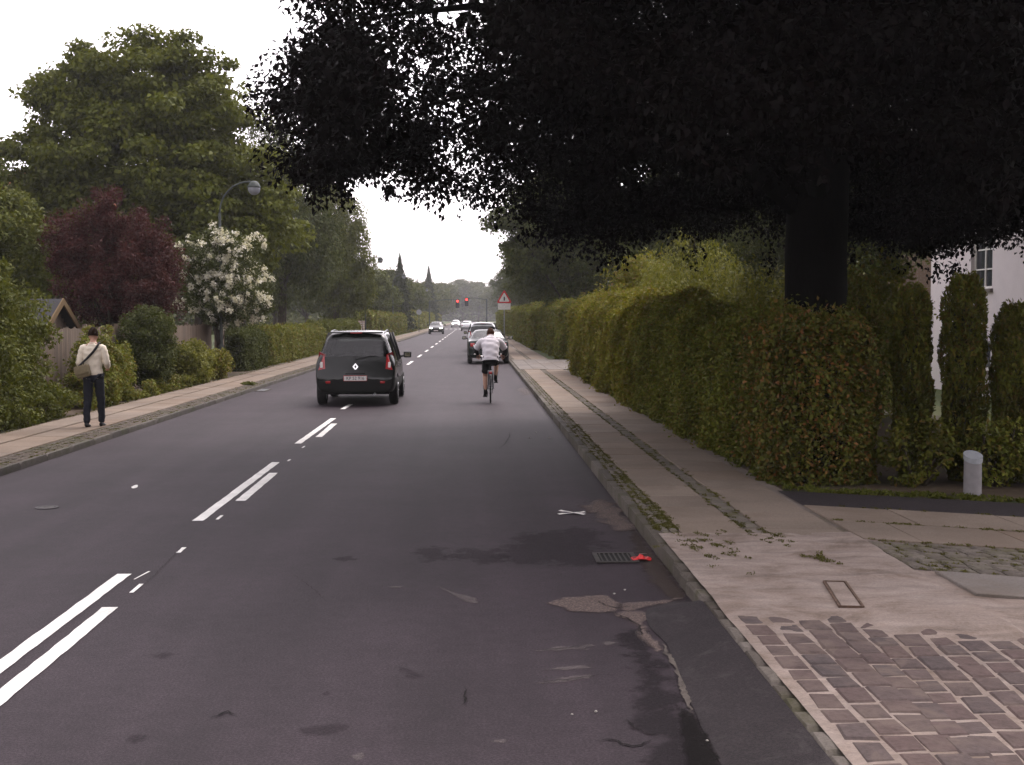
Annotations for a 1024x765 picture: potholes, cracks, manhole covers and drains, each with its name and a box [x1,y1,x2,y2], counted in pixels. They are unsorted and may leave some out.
crack [597,719,656,746]
manhole cover [823,580,865,608]
drain grate [592,552,640,563]
